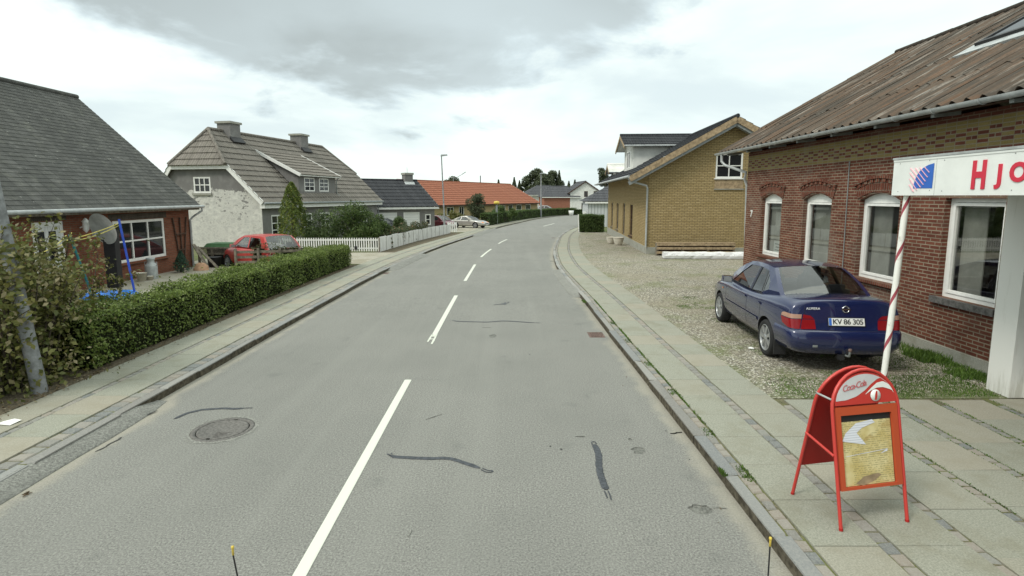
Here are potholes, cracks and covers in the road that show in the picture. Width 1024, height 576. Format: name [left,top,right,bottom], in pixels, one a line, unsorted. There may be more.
manhole cover [183,416,260,444]
